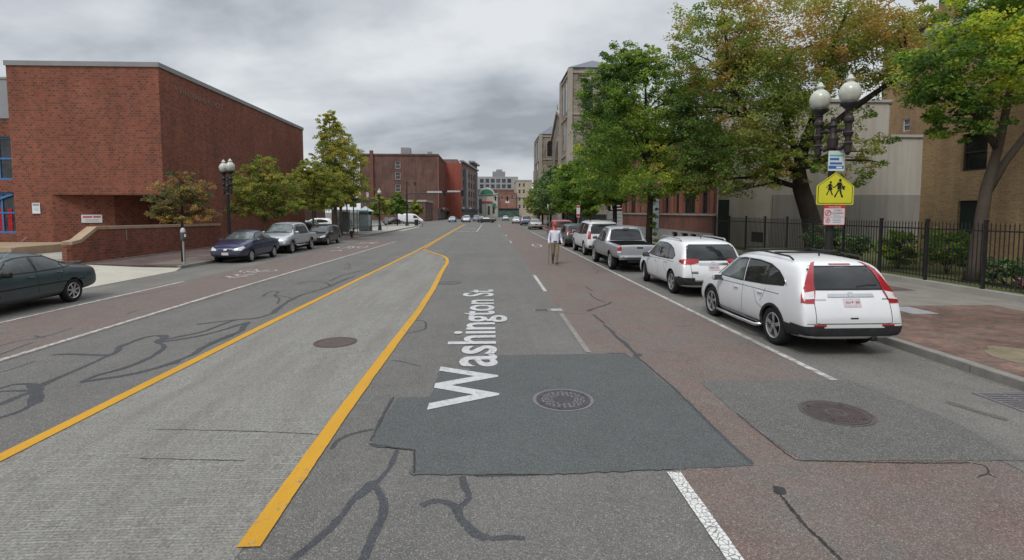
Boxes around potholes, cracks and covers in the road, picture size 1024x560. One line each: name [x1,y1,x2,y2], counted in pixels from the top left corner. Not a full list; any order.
drain grate [972,391,1024,412]
manhole cover [313,337,357,348]
manhole cover [533,389,594,412]
crack [0,317,72,373]
manhole cover [798,400,877,427]
crack [773,486,842,560]
